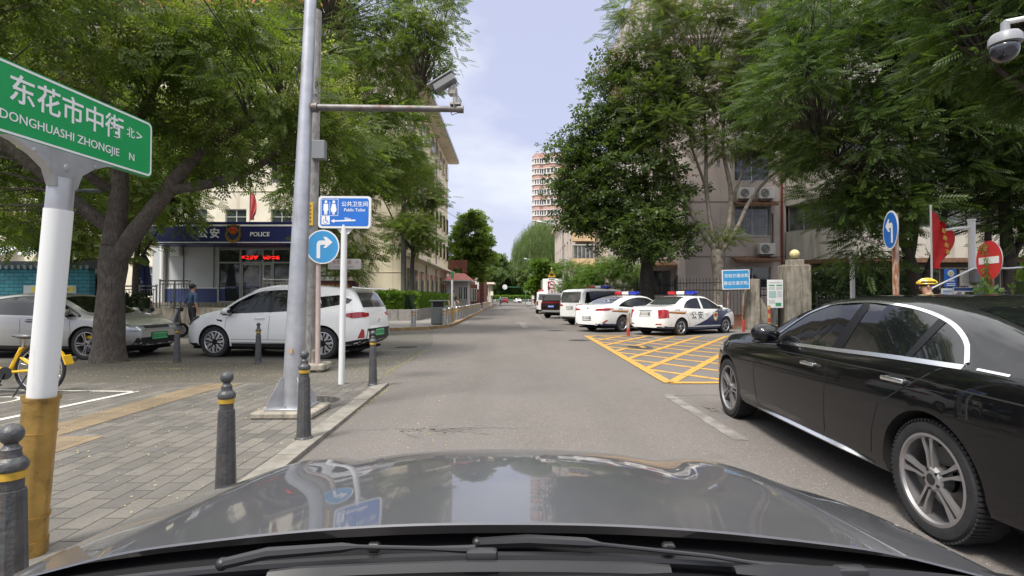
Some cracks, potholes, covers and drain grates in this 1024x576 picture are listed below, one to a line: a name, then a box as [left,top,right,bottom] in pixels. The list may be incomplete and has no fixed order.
crack [383,427,546,439]
manhole cover [316,395,345,404]
